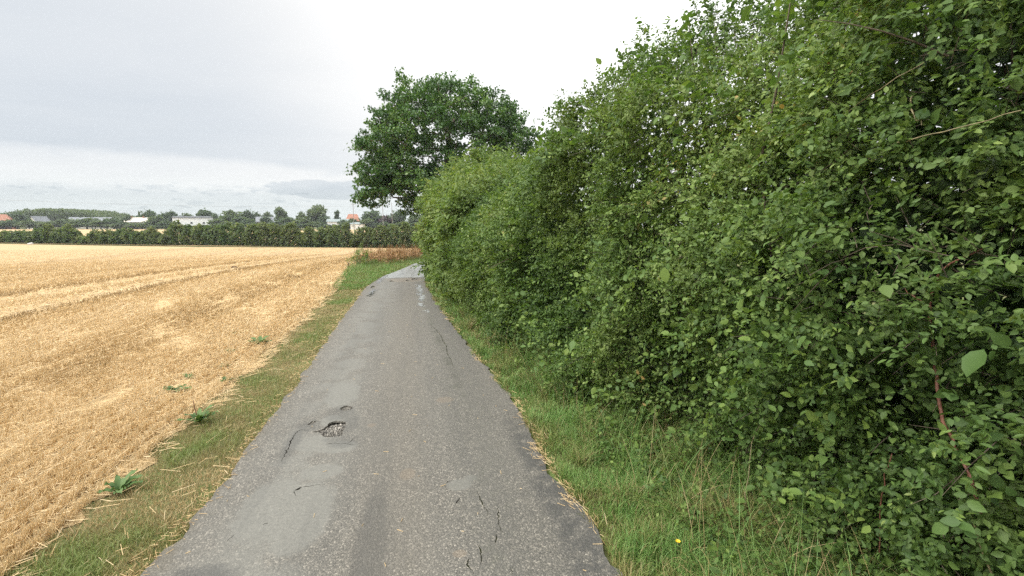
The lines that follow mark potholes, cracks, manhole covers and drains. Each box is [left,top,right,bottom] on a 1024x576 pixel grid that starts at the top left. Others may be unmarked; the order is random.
crack [466,492,503,571]
pothole [313,421,346,437]
